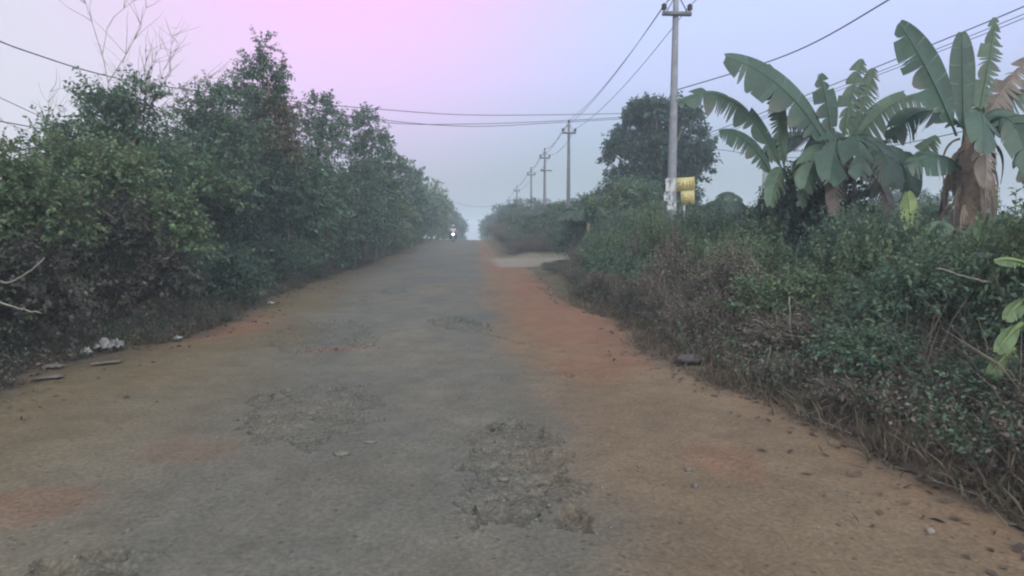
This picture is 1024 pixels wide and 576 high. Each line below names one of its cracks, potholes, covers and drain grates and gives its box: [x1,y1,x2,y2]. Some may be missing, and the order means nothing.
pothole [228,383,396,453]
pothole [427,316,497,334]
pothole [24,545,158,576]
pothole [448,415,602,535]
pothole [259,318,381,355]
